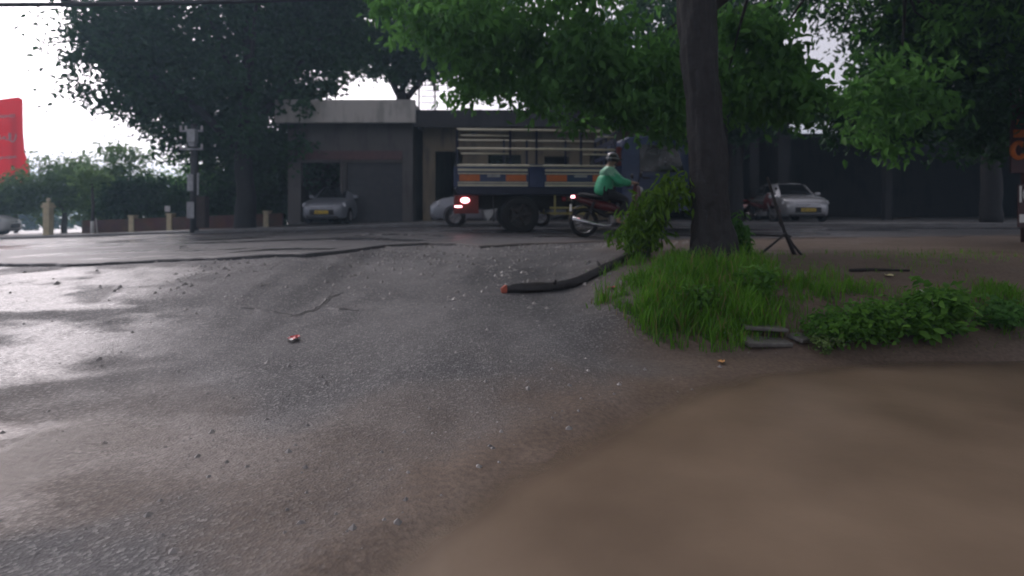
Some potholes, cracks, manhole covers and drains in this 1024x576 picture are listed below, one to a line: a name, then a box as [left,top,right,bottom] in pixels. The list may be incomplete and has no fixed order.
crack [242,292,359,317]
